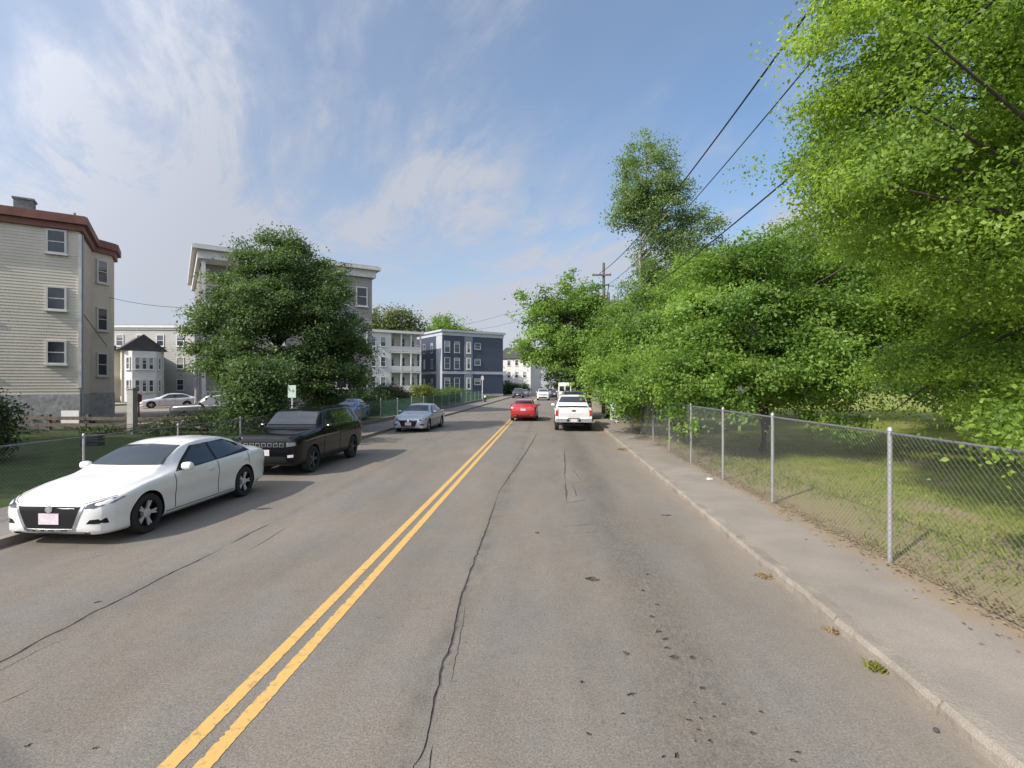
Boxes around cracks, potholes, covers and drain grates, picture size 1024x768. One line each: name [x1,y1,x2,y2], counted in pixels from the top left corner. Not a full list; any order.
crack [413,431,538,768]
crack [564,450,583,503]
crack [0,523,285,670]
